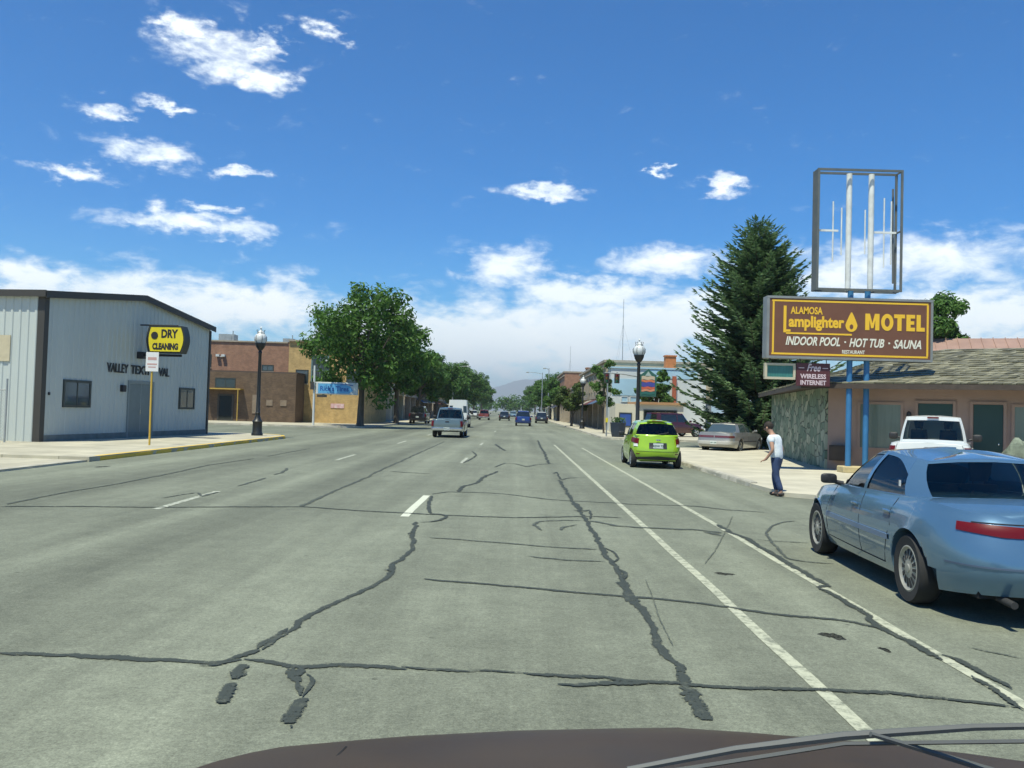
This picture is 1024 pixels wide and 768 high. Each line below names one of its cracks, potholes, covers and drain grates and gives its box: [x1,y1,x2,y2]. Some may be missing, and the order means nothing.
crack [645,579,673,645]
crack [433,444,834,564]
